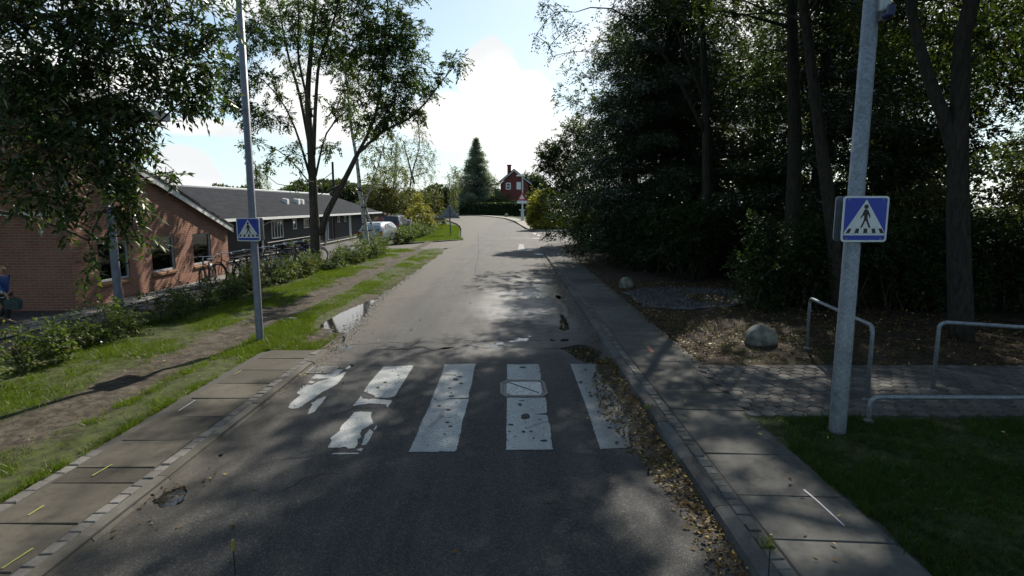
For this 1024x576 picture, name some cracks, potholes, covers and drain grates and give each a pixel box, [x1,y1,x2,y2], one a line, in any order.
manhole cover [500,380,548,397]
pothole [559,314,569,331]
pothole [153,486,188,508]
